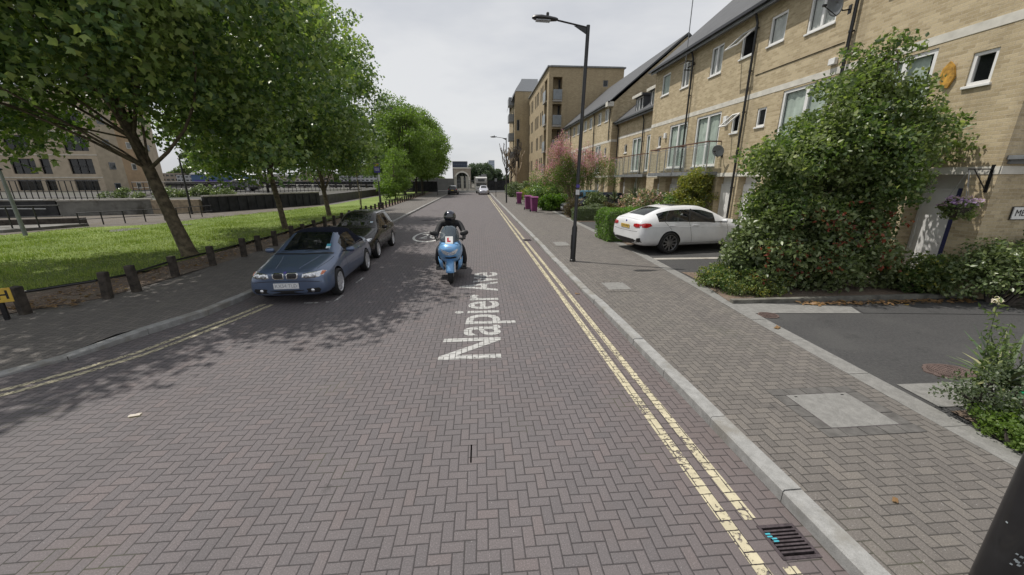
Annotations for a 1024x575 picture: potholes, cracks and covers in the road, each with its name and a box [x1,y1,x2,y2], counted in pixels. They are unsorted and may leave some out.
drain grate [756,523,822,561]
manhole cover [766,386,927,438]
manhole cover [595,280,639,292]
manhole cover [922,363,978,380]
